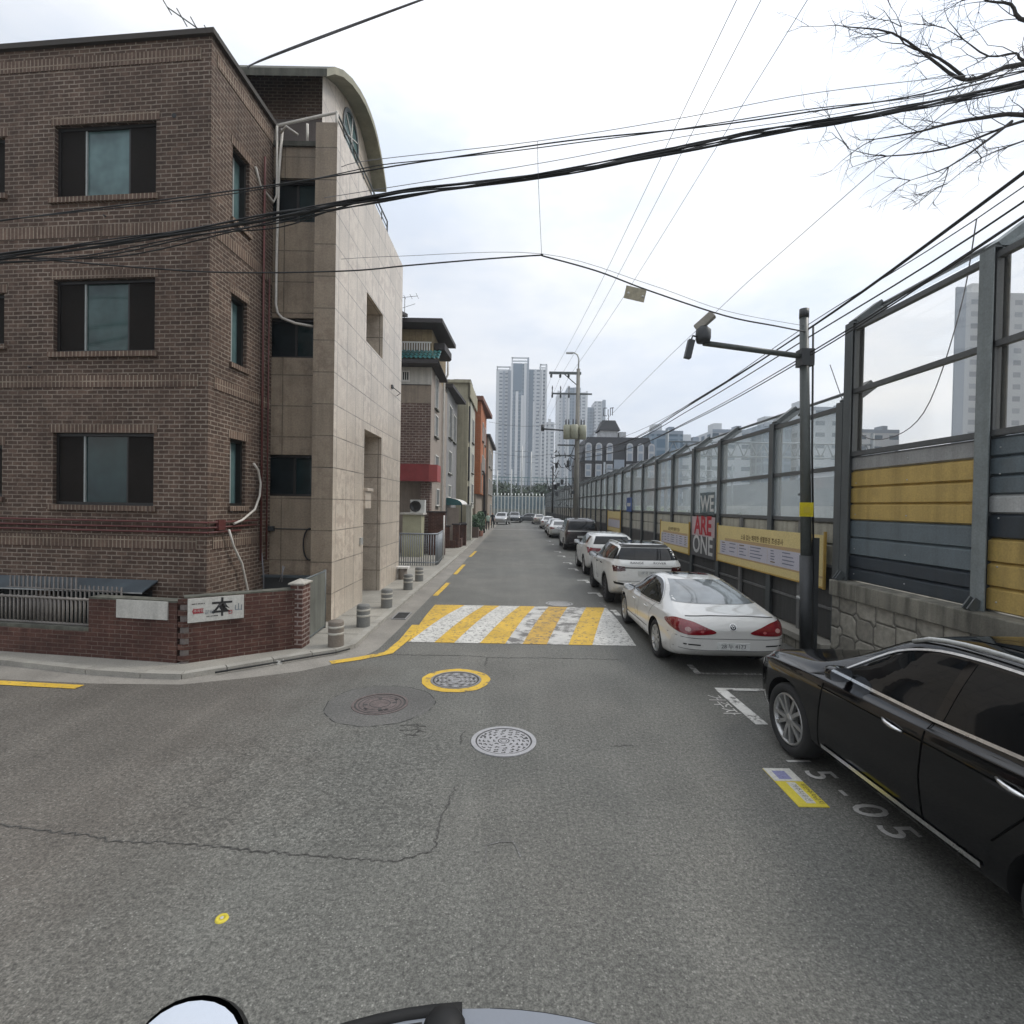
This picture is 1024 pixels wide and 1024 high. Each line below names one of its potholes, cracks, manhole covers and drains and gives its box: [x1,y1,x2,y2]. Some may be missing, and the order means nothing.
manhole cover [422,669,490,692]
manhole cover [323,685,436,727]
manhole cover [471,726,536,757]
crack [0,786,456,862]
drain grate [391,612,412,620]
